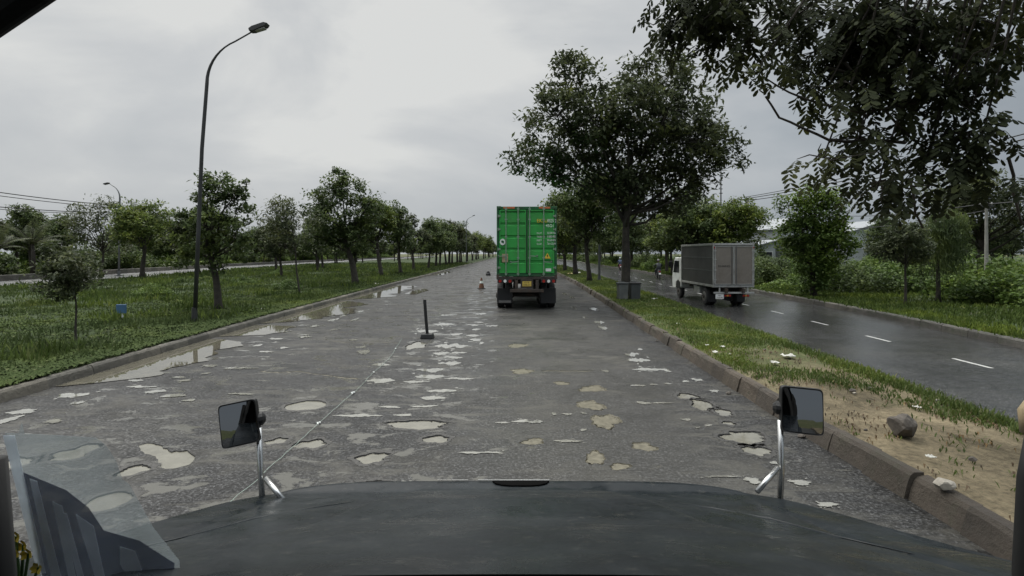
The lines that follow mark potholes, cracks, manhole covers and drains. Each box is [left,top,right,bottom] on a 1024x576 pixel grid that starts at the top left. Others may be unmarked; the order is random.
pothole [403,341,430,351]
pothole [733,443,778,459]
pothole [712,428,774,447]
pothole [286,436,333,451]
pothole [279,398,331,412]
pothole [101,460,161,482]
pothole [708,406,739,418]
pothole [346,449,396,467]
